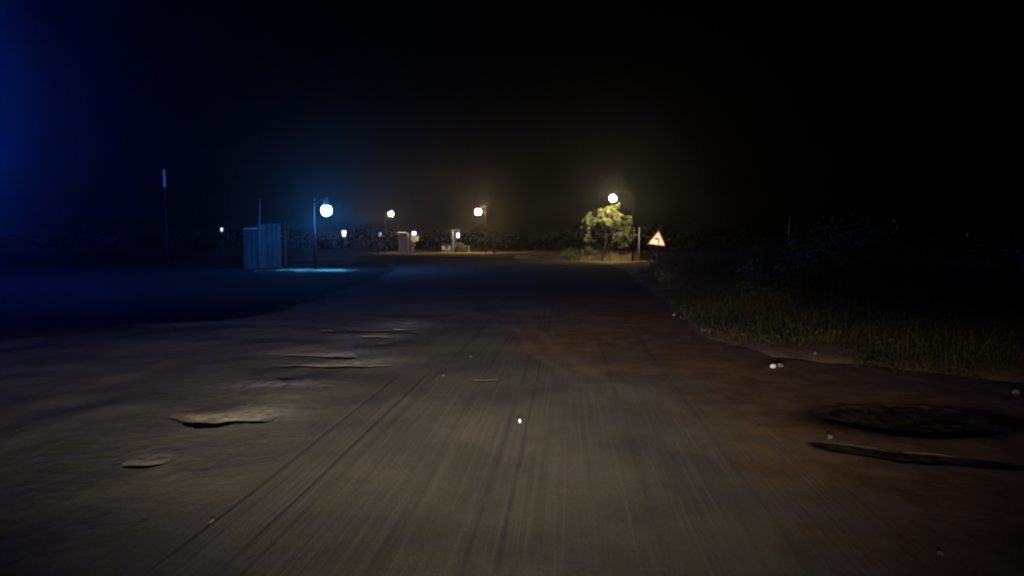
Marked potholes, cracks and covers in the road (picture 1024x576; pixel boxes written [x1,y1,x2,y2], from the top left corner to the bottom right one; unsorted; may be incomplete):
pothole [121,454,171,469]
pothole [812,405,1011,440]
pothole [167,404,277,429]
pothole [272,361,398,369]
pothole [281,349,358,360]
pothole [815,441,975,466]
